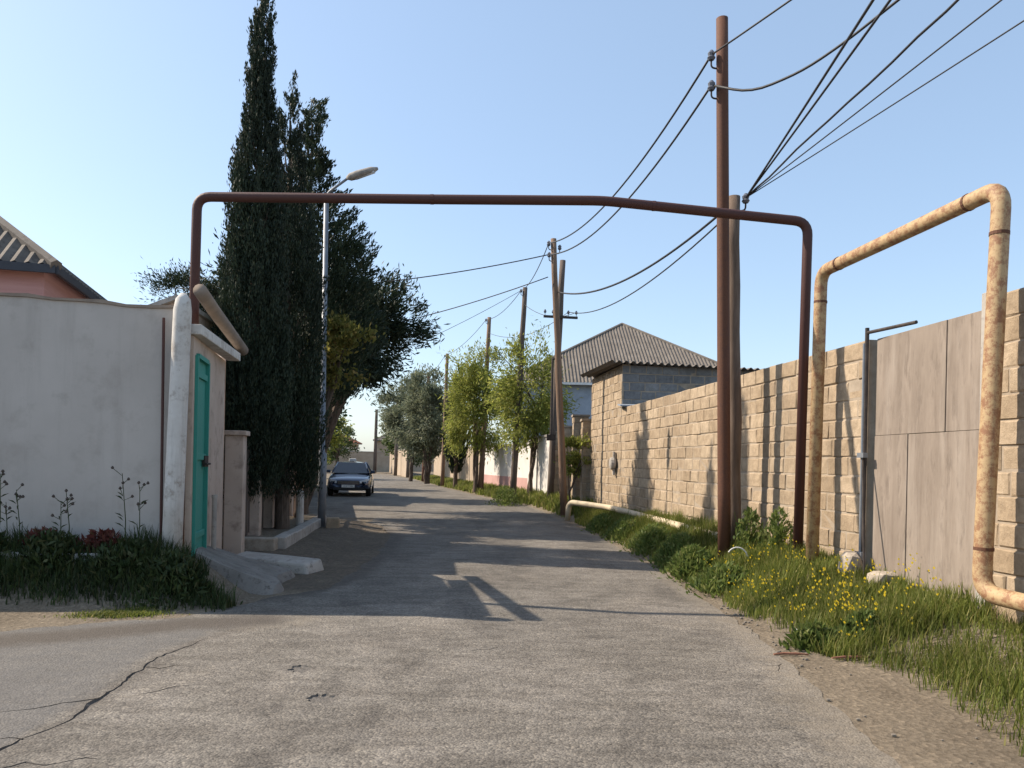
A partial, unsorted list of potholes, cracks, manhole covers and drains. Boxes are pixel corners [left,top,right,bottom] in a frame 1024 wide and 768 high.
pothole [306,693,336,702]
crack [0,642,197,768]
pothole [288,665,315,673]
